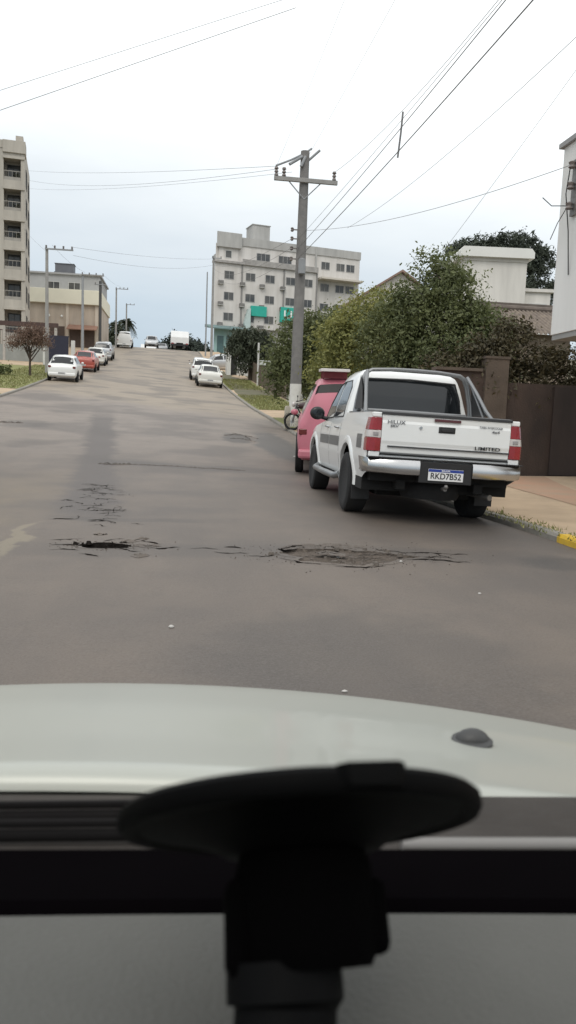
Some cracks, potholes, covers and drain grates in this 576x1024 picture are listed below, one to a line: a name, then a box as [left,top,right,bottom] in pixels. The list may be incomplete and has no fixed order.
crack [50,484,173,558]
pothole [49,539,178,551]
pothole [230,542,494,575]
